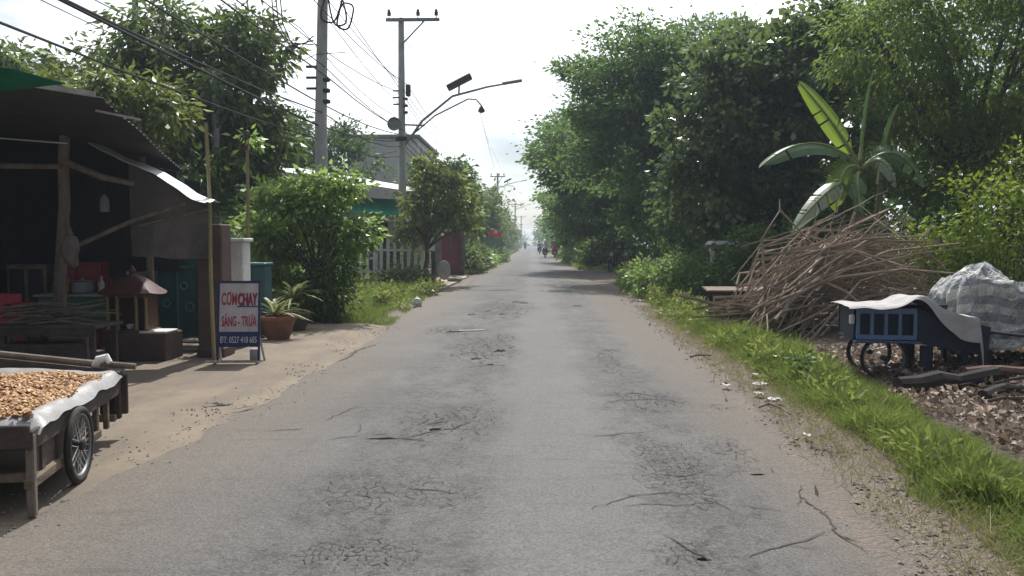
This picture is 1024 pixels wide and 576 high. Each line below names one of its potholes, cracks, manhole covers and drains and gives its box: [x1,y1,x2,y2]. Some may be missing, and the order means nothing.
crack [593,432,773,510]
crack [426,299,535,367]
crack [309,469,483,514]
crack [329,404,503,447]
crack [594,346,689,412]
crack [742,485,868,558]
crack [291,537,428,574]
crack [656,535,716,569]
